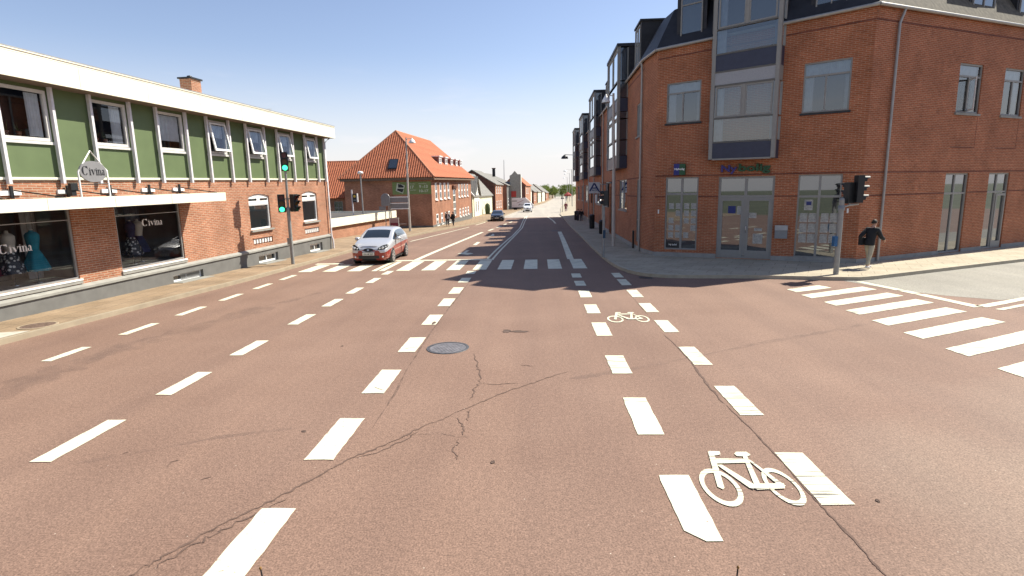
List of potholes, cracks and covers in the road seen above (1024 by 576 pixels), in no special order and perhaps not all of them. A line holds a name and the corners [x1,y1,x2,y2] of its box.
manhole cover [16,321,59,330]
crack [668,338,887,576]
manhole cover [426,342,469,354]
crack [128,355,568,576]
